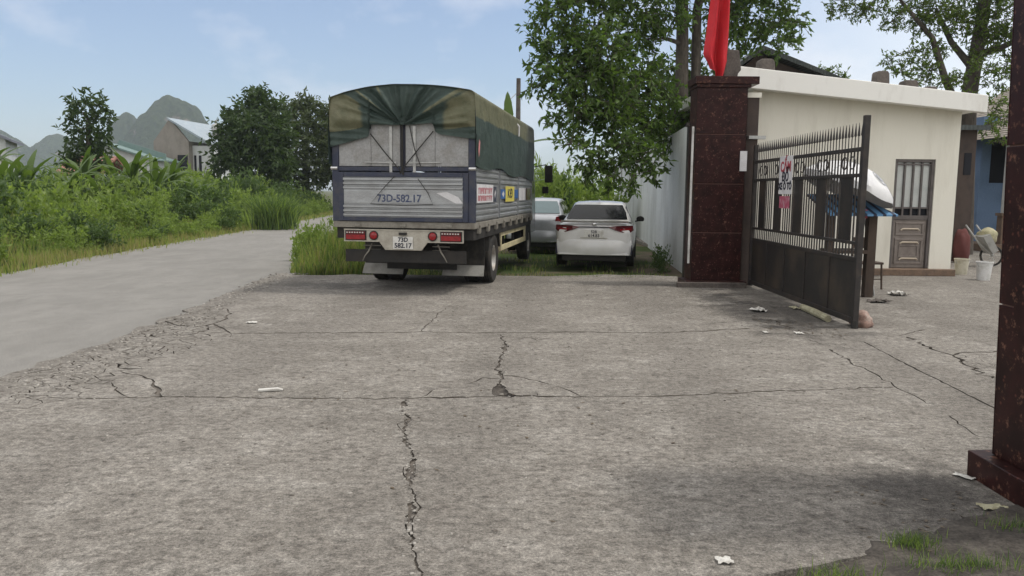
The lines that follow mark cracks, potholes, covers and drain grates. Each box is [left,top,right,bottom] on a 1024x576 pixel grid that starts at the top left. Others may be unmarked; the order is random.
crack [756,319,997,437]
crack [9,279,275,409]
crack [397,387,445,576]
crack [471,335,581,397]
